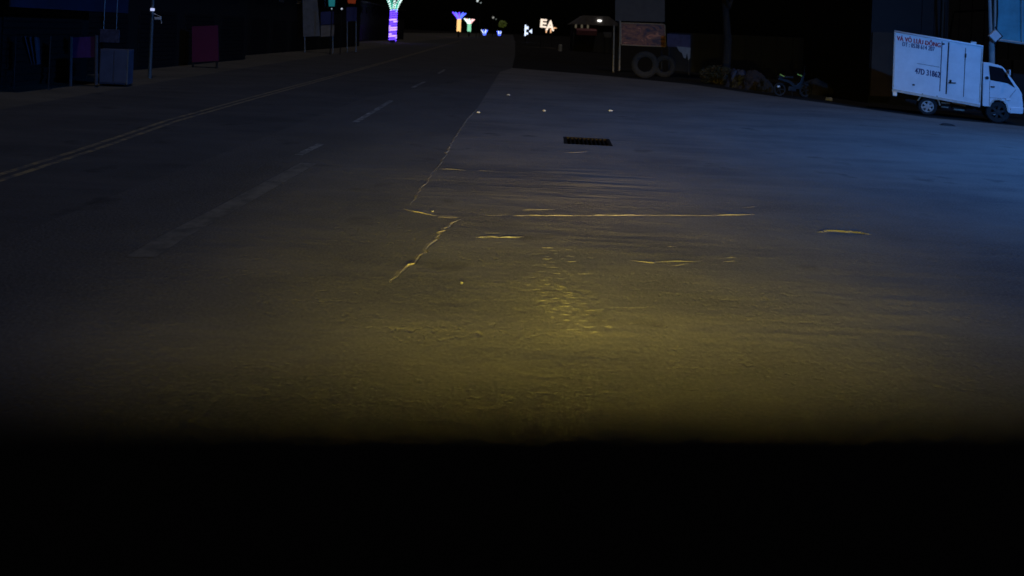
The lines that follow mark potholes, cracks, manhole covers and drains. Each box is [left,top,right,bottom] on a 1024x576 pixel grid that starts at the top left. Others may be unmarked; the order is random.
crack [389,109,524,283]
crack [629,245,702,266]
